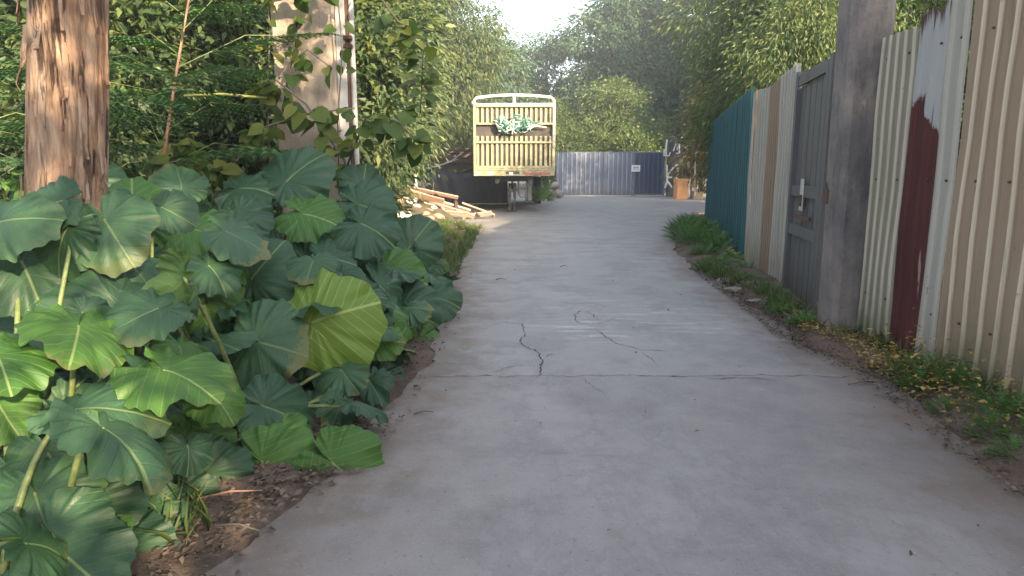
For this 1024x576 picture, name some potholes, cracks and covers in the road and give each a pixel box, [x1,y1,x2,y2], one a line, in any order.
crack [469,315,550,374]
